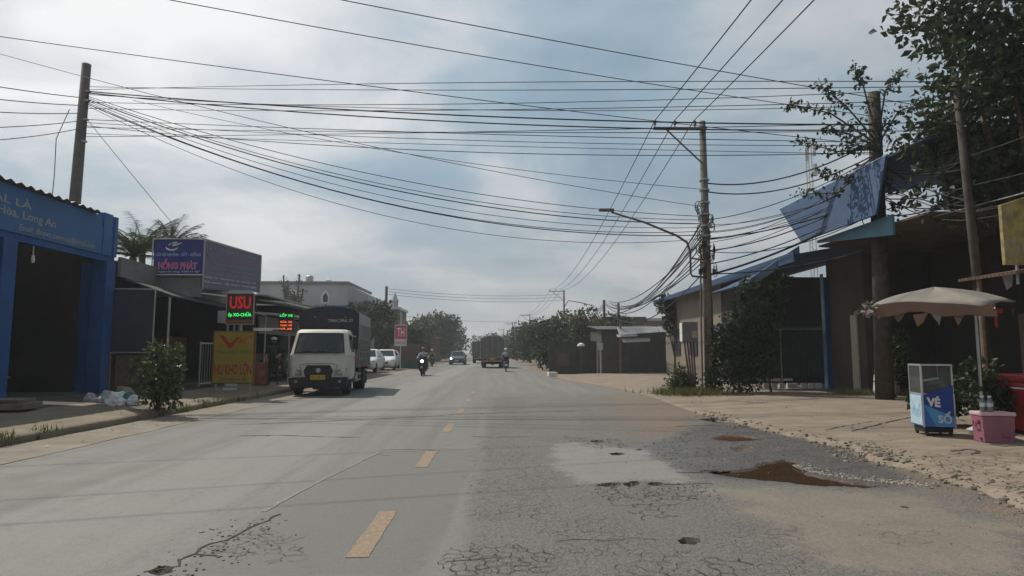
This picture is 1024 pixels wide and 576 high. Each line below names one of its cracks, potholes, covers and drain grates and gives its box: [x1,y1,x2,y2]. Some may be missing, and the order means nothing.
pothole [678,537,701,545]
crack [438,471,810,576]
pothole [706,459,889,487]
crack [463,435,552,519]
crack [143,514,309,572]
